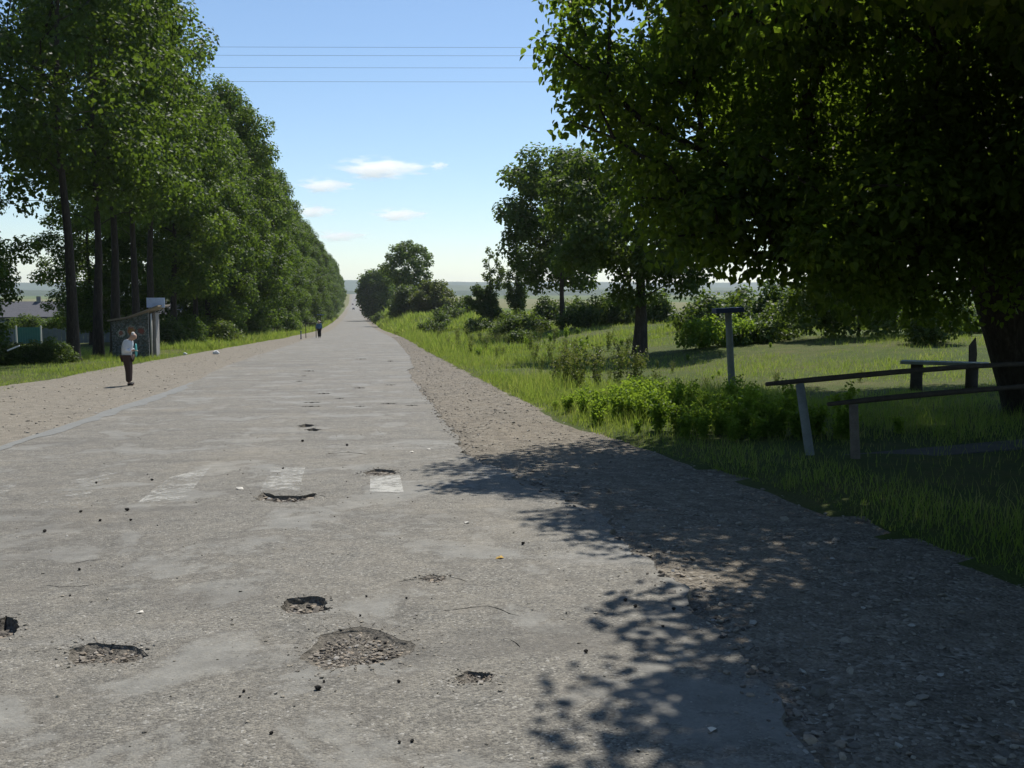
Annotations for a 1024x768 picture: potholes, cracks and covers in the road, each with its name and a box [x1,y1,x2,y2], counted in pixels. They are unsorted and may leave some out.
pothole [419,575,446,583]
pothole [281,596,329,614]
pothole [456,671,496,684]
pothole [256,492,317,503]
pothole [0,616,19,639]
pothole [299,627,416,670]
pothole [68,643,148,665]
